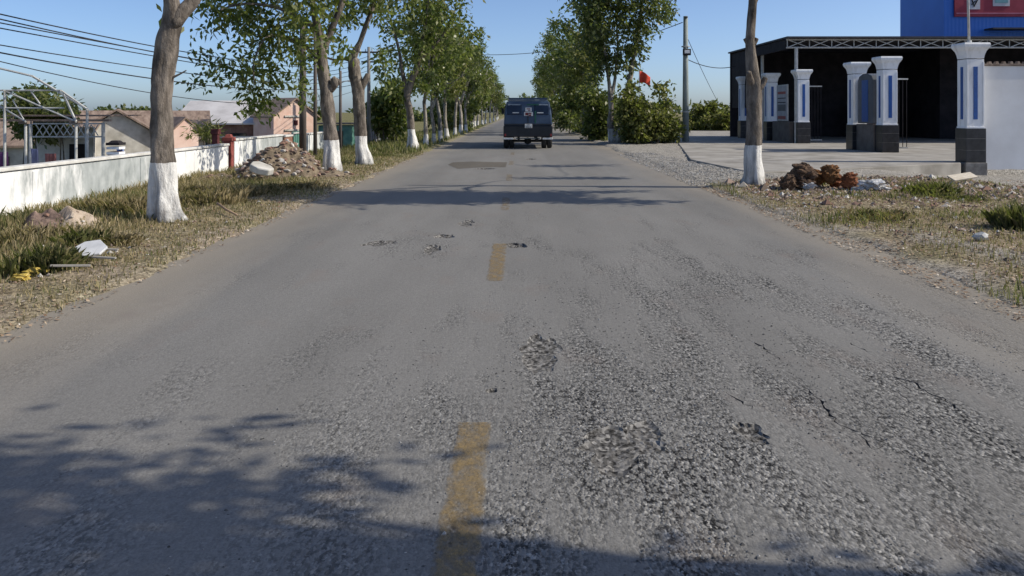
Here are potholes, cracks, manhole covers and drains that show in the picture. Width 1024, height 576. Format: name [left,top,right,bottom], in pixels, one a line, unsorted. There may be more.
pothole [577,420,667,477]
pothole [732,422,771,445]
pothole [519,333,563,374]
crack [788,380,882,450]
crack [884,373,1001,421]
pothole [424,245,441,255]
